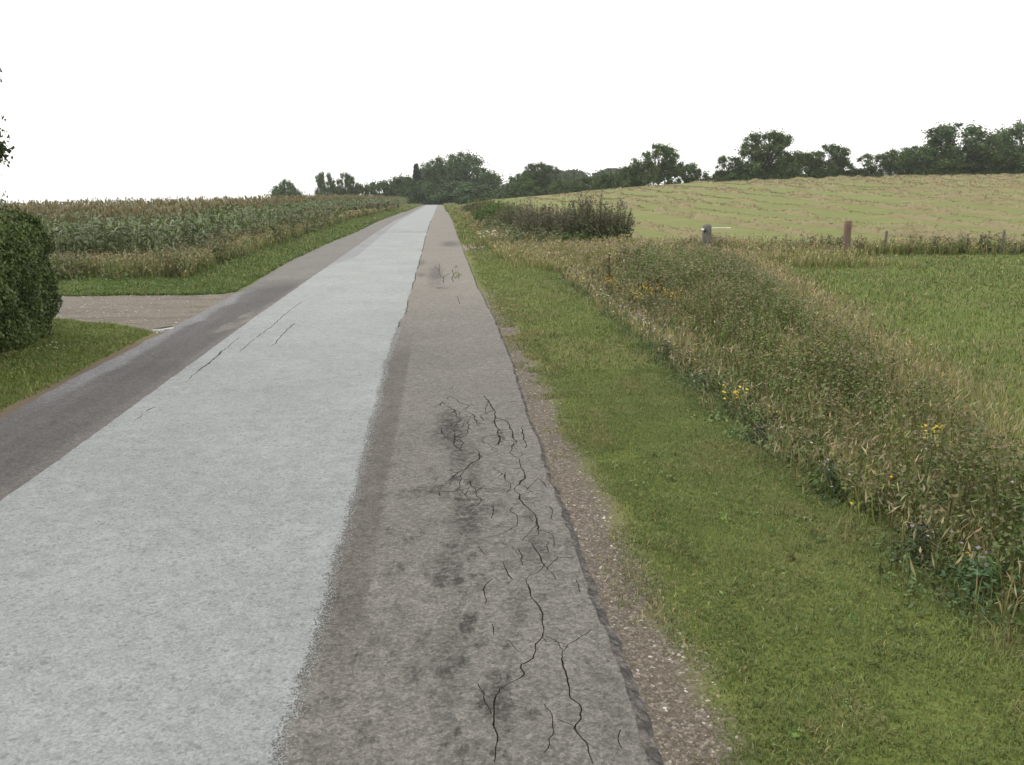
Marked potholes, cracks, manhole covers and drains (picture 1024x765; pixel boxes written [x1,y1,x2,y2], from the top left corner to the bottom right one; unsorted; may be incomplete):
crack [188,302,301,380]
crack [421,387,623,764]
